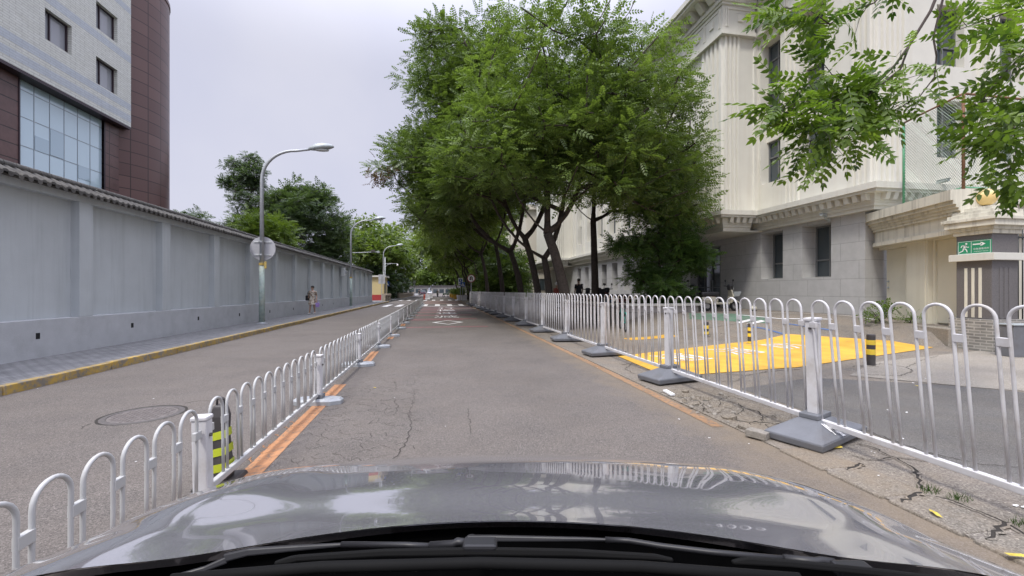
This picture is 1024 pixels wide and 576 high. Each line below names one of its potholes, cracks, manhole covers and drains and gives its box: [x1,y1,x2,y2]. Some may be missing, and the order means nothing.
crack [853,430,1024,536]
crack [248,366,424,470]
manhole cover [88,404,193,428]
crack [699,369,798,428]
